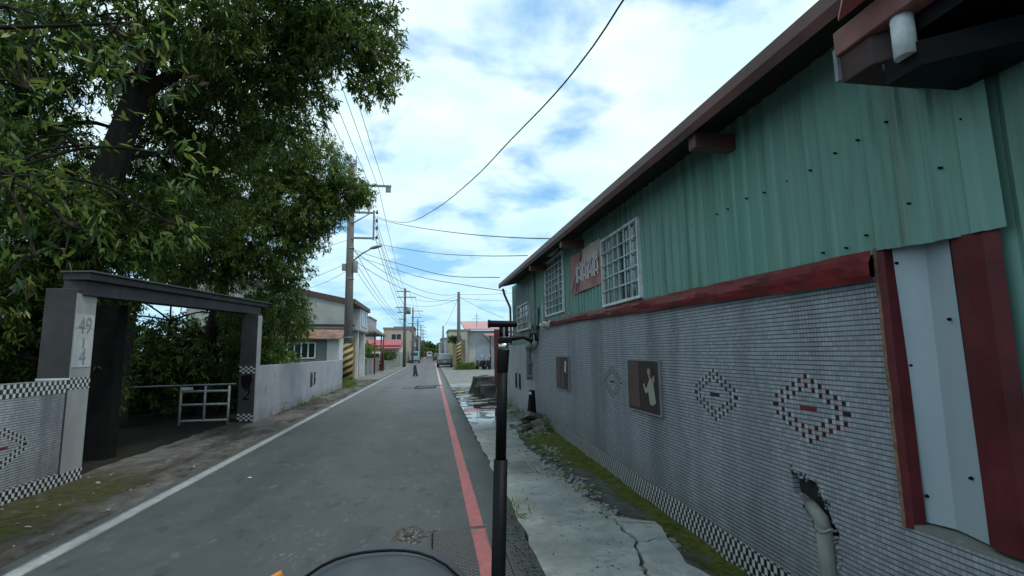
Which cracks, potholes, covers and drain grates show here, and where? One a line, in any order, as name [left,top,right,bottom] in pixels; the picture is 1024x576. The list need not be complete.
pothole [391,527,433,545]
